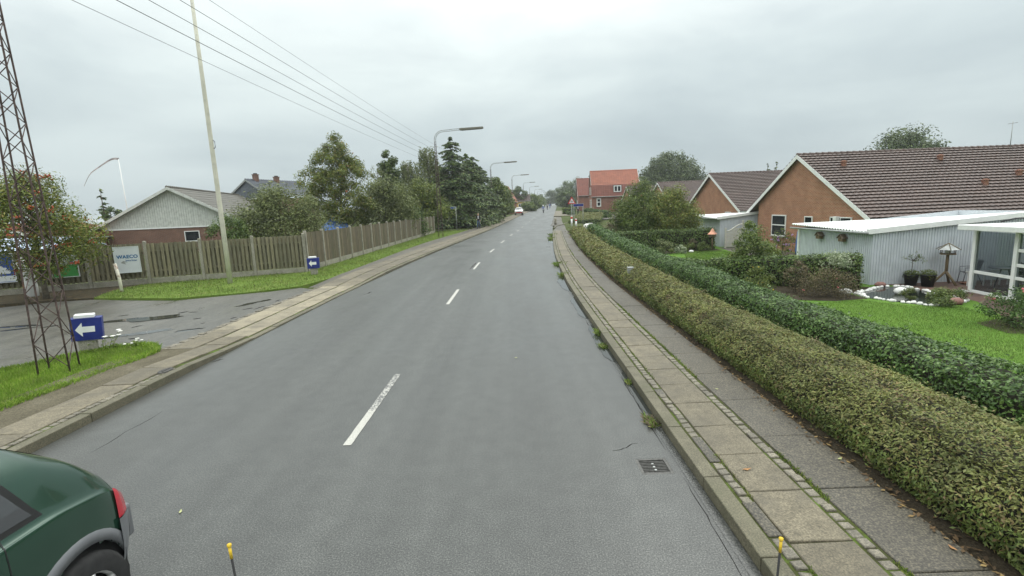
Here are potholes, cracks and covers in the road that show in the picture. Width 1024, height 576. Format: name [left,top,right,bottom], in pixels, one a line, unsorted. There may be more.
drain grate [635,458,674,475]
crack [613,379,664,451]
